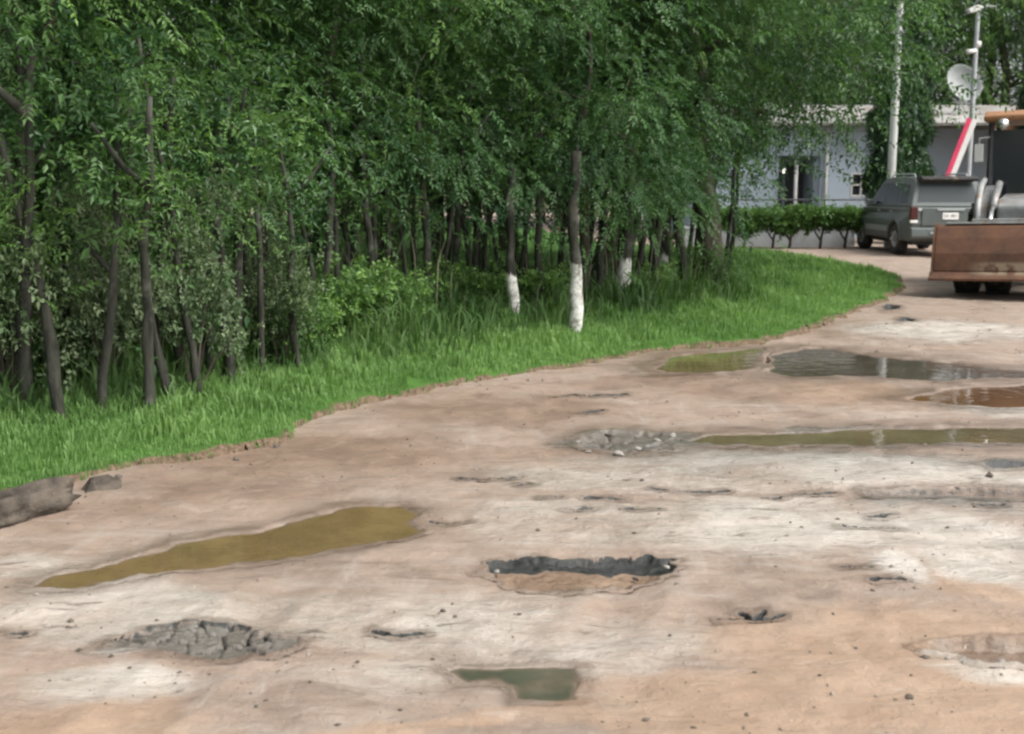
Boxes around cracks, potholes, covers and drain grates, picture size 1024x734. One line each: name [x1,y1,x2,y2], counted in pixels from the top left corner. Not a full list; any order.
pothole [755,345,1024,383]
pothole [902,632,1024,671]
pothole [15,500,436,594]
pothole [641,347,774,375]
pothole [887,382,1024,410]
pothole [466,552,687,596]
pothole [434,658,594,706]
pothole [679,423,1024,449]
